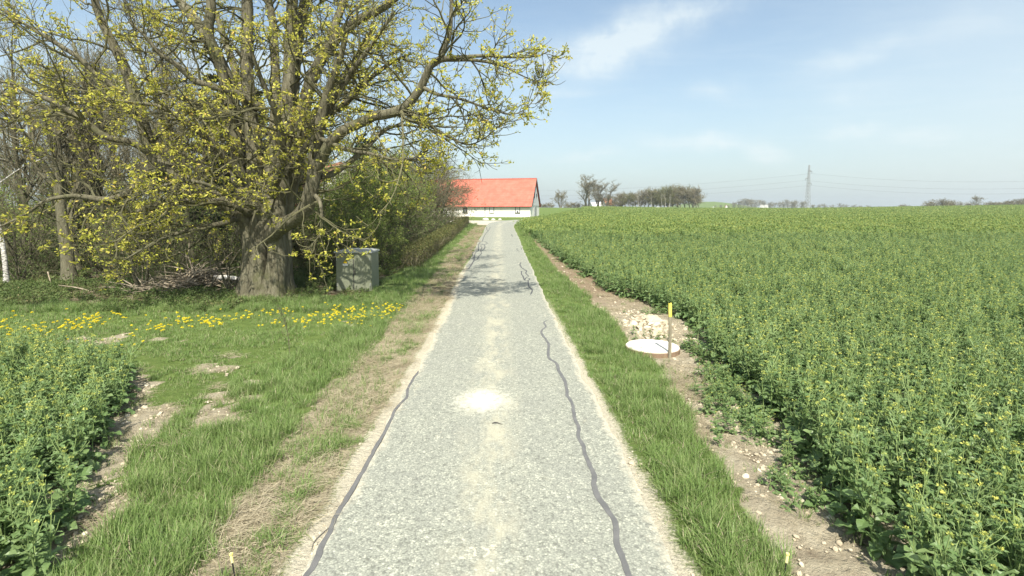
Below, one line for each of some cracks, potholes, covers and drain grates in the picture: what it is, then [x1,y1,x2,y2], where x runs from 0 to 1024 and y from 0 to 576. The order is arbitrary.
manhole cover [625,339,680,358]
